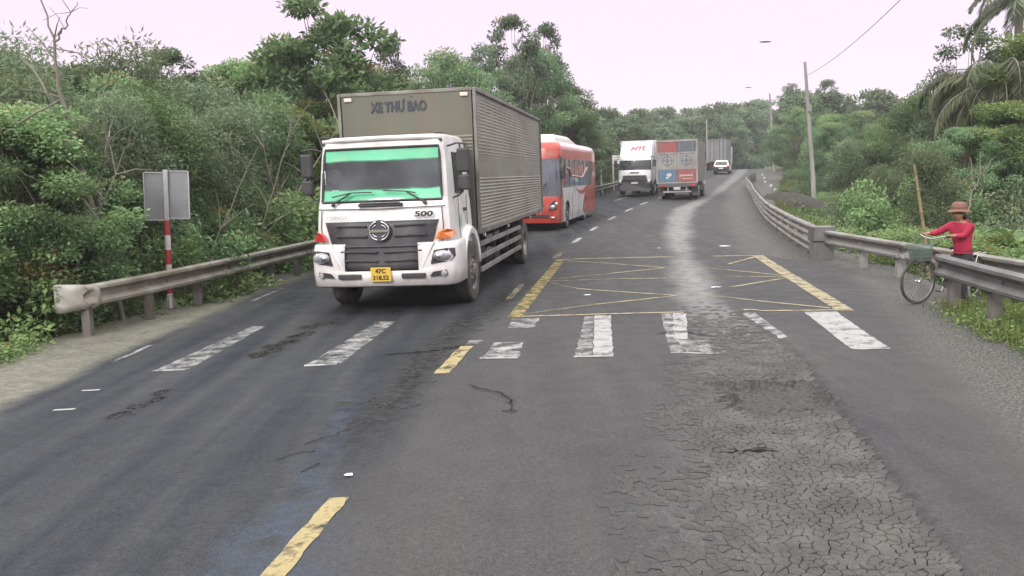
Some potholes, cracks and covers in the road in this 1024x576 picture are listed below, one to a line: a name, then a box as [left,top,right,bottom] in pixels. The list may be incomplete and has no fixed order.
crack [276,294,518,472]
pothole [106,389,169,419]
pothole [299,318,351,329]
pothole [248,331,316,359]
crack [596,302,963,576]
